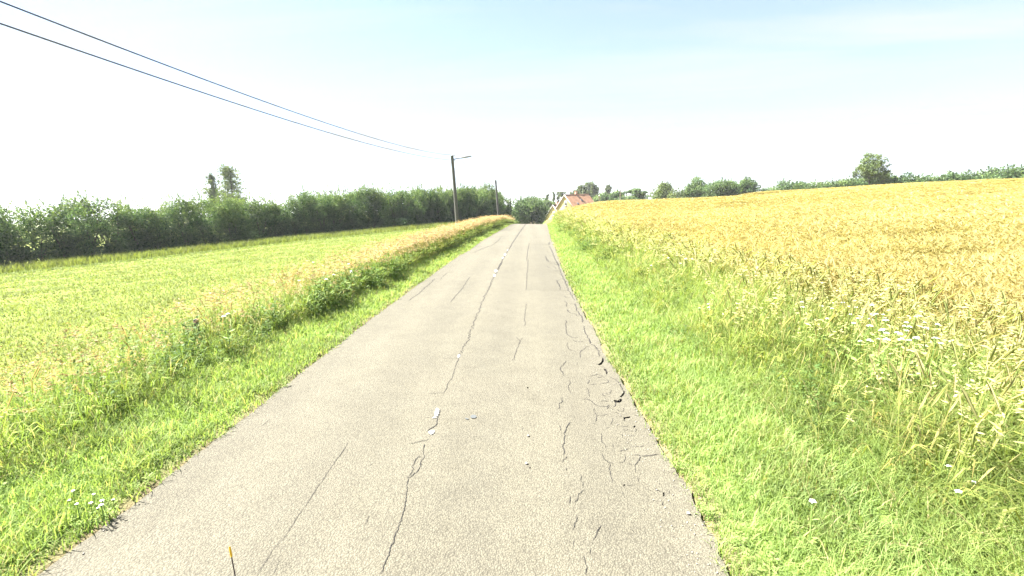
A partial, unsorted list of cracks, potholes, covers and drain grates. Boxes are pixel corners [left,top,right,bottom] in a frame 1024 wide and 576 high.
crack [569,478,601,574]
crack [475,227,670,510]
crack [258,445,347,573]
crack [364,359,459,575]
